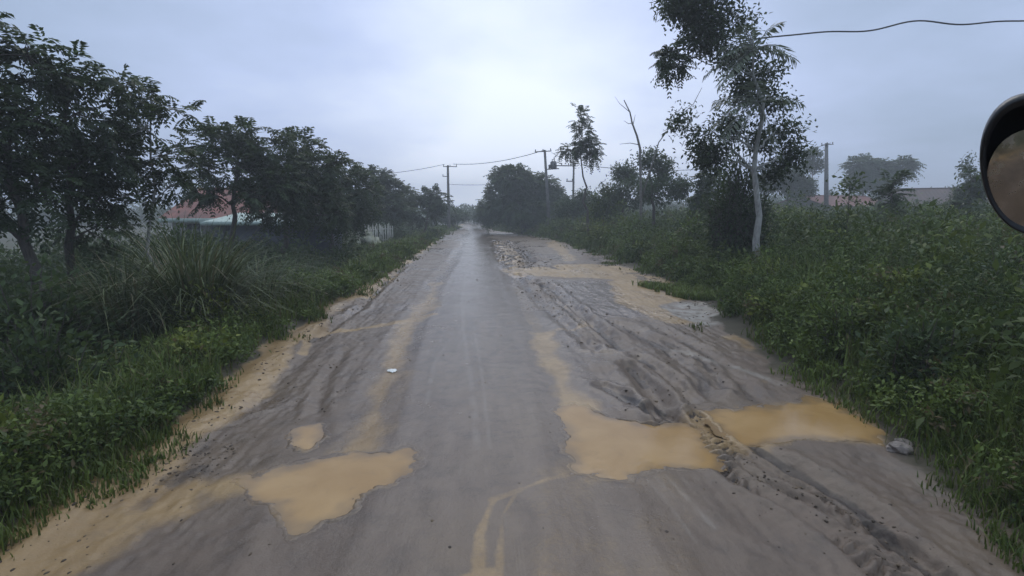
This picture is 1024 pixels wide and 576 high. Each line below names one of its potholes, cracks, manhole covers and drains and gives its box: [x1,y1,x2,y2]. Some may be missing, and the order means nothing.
pothole [548,402,732,484]
pothole [697,394,886,447]
pothole [284,423,332,453]
pothole [229,445,426,542]
